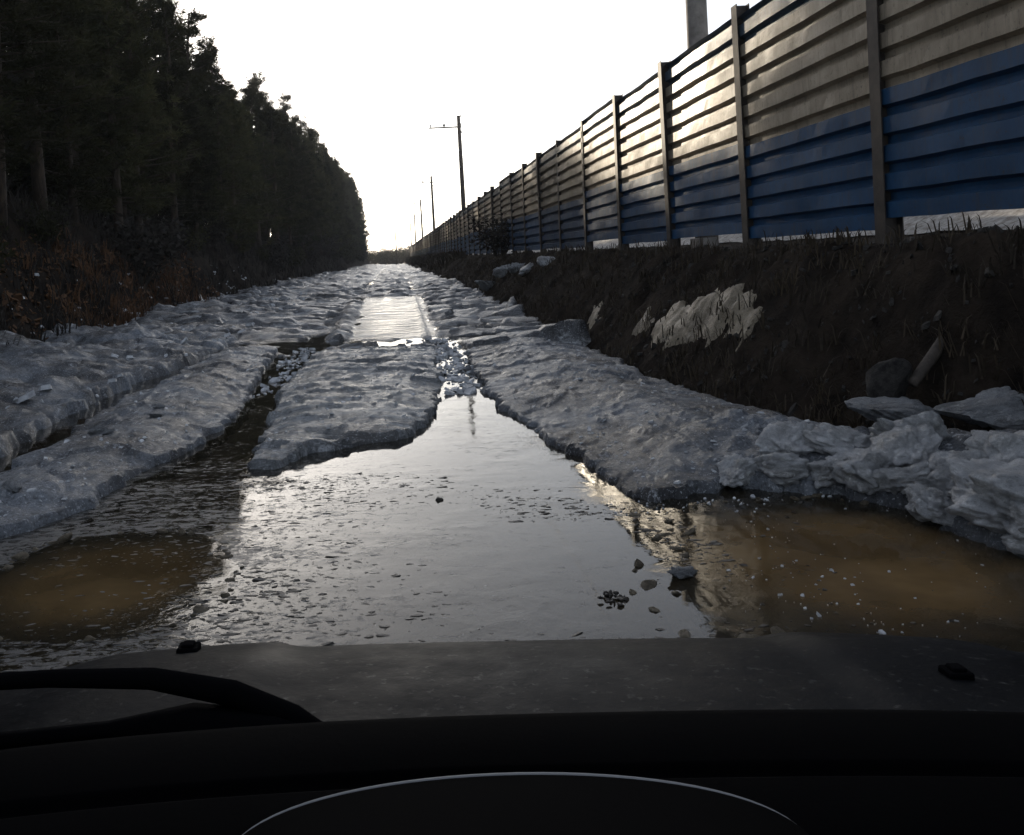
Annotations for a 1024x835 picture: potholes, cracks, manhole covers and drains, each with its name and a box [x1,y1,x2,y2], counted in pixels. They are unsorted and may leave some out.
pothole [0,528,247,670]
pothole [628,493,1024,652]
